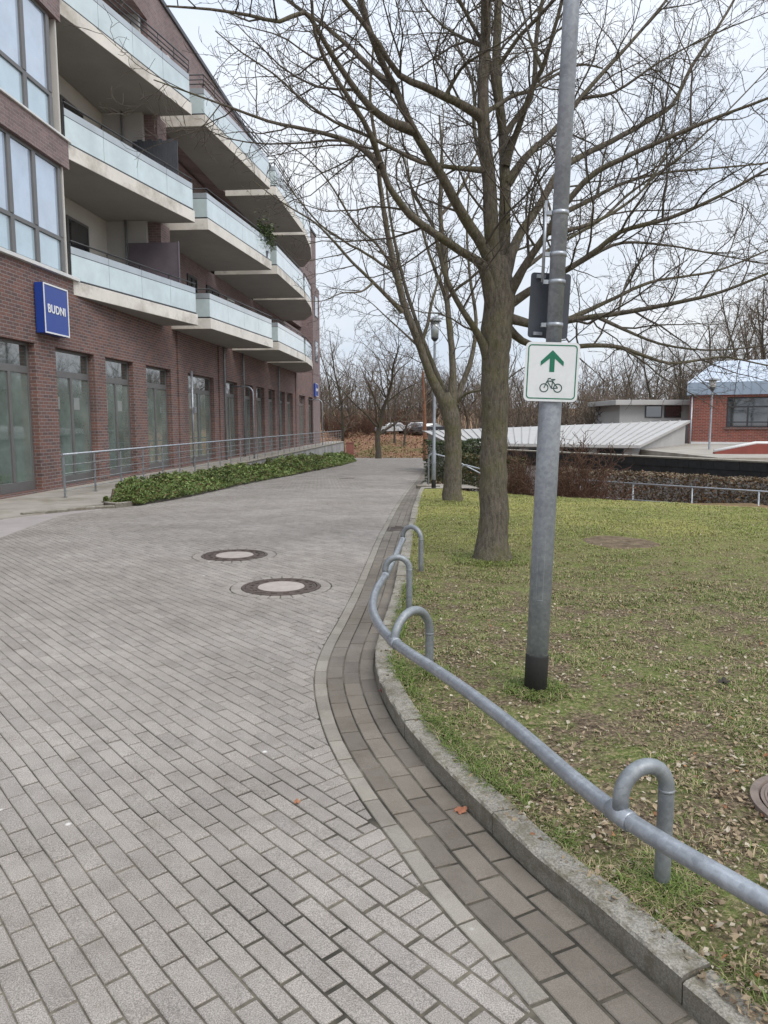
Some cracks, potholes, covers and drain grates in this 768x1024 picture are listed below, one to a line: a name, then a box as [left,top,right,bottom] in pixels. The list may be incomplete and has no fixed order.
manhole cover [201,549,267,561]
manhole cover [241,578,320,596]
manhole cover [750,775,768,821]
